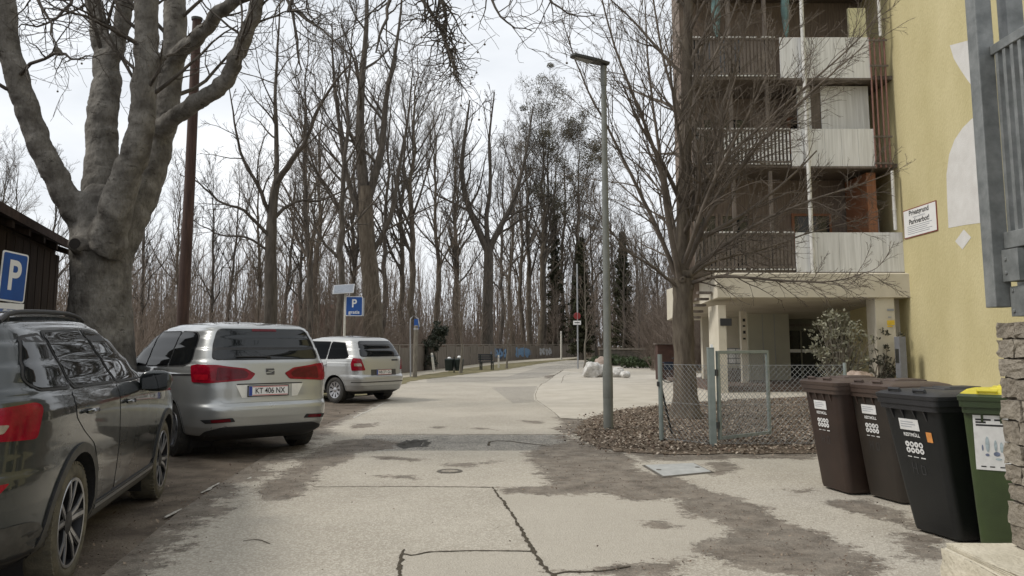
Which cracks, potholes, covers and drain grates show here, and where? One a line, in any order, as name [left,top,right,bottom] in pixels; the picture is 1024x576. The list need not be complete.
pothole [396,439,430,449]
manhole cover [642,463,715,478]
